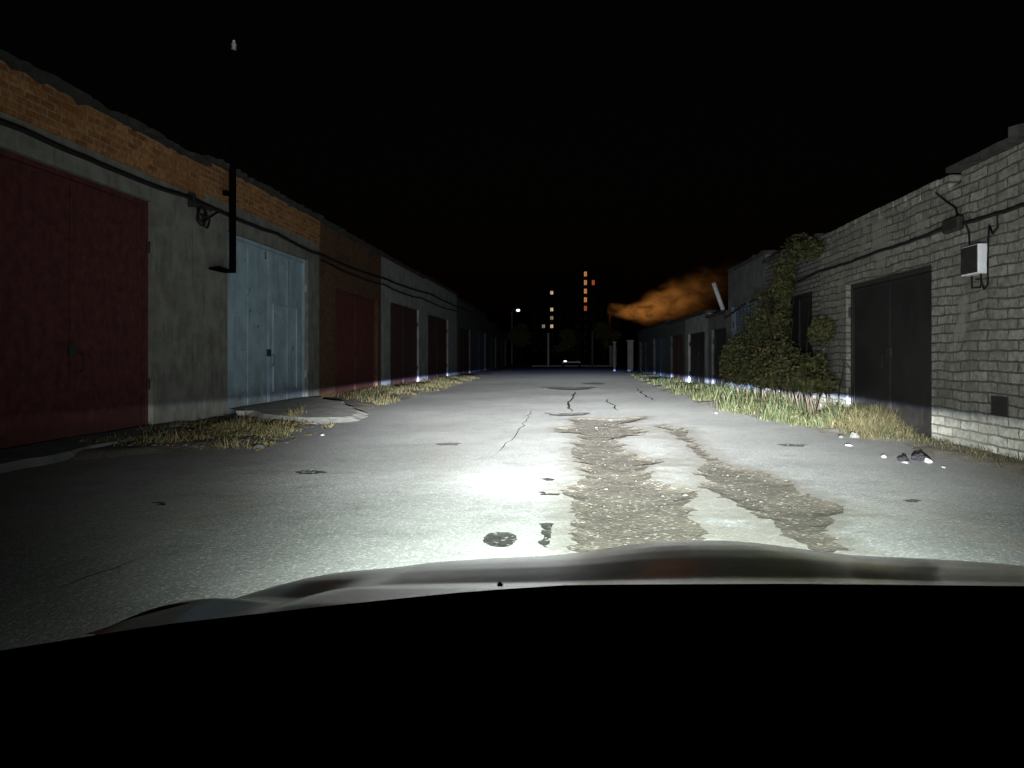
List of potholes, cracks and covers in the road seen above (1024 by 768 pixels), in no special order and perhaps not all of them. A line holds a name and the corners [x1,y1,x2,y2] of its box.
pothole [553,416,709,552]
crack [34,552,158,596]
pothole [538,523,554,547]
pothole [652,424,855,553]
pothole [483,532,518,547]
